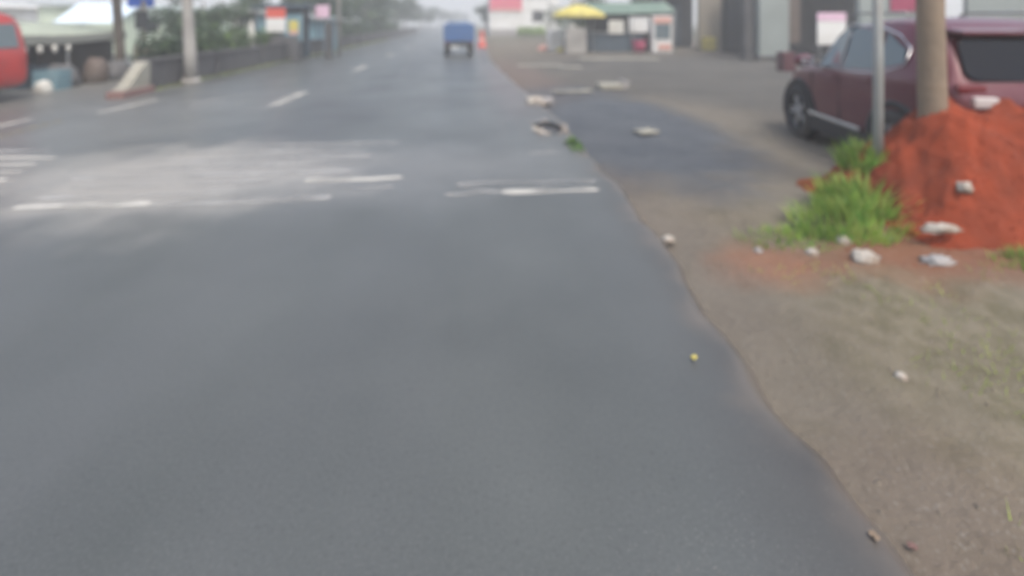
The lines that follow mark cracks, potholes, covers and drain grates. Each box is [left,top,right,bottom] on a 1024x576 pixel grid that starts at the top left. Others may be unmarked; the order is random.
pothole [531,118,569,135]
